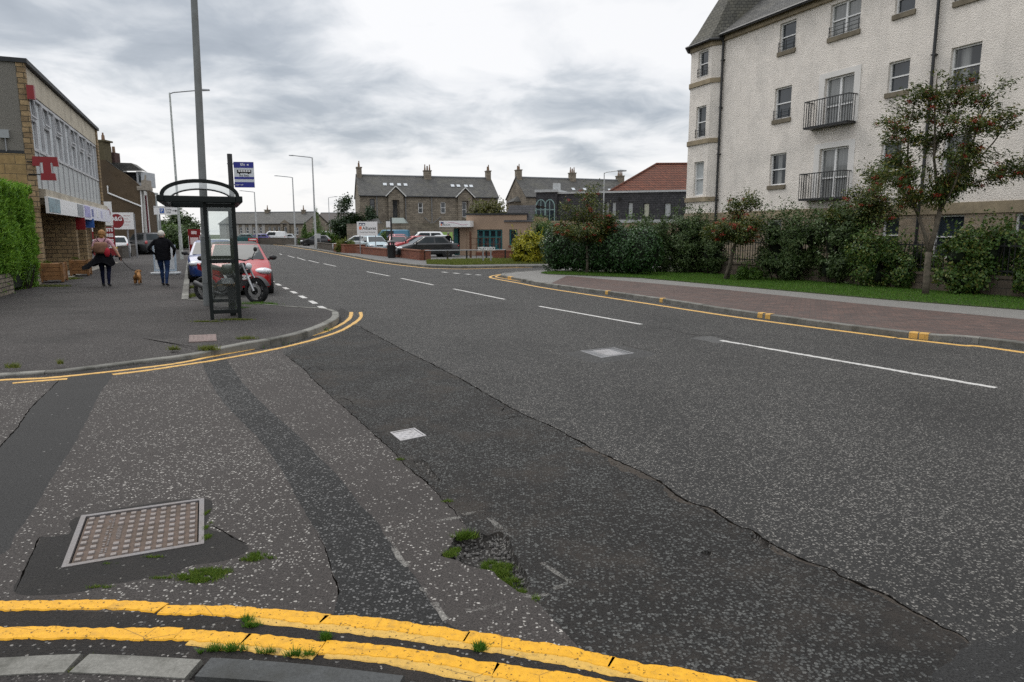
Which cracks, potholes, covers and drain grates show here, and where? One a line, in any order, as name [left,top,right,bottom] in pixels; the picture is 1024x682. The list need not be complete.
manhole cover [390,428,426,441]
manhole cover [61,498,204,568]
utility cover [189,334,217,343]
crack [0,380,59,447]
manhole cover [582,347,633,358]
pothole [441,531,530,591]
